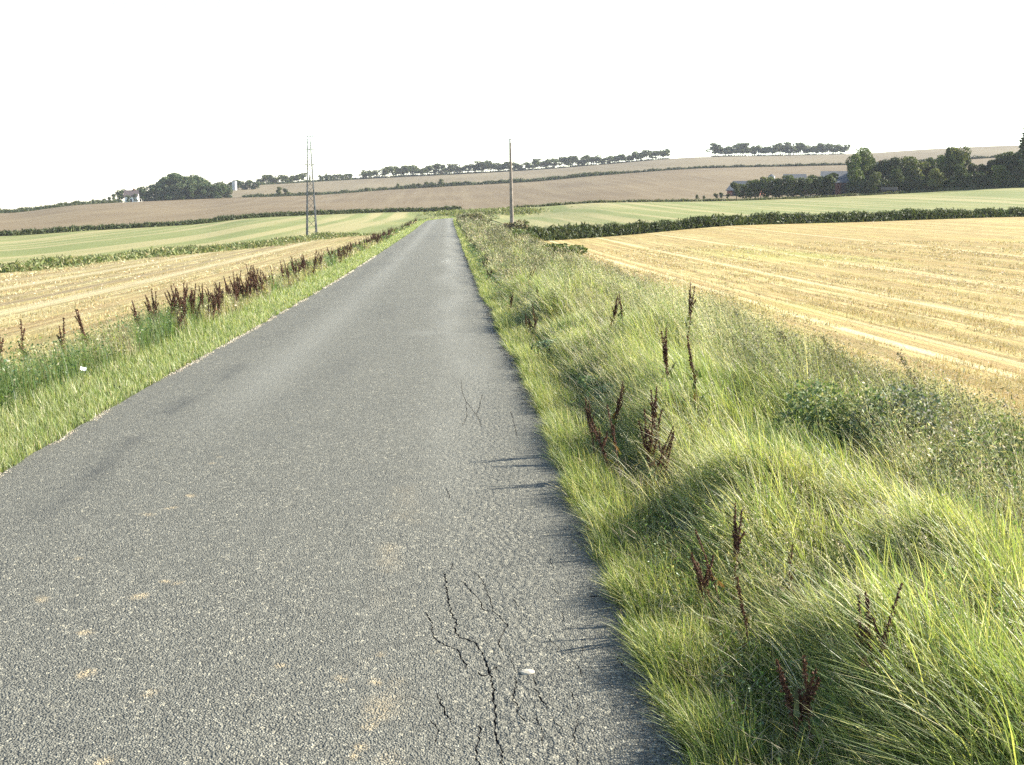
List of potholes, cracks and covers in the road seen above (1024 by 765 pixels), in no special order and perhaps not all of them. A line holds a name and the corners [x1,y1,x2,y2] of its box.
crack [425,564,579,765]
crack [461,381,483,427]
